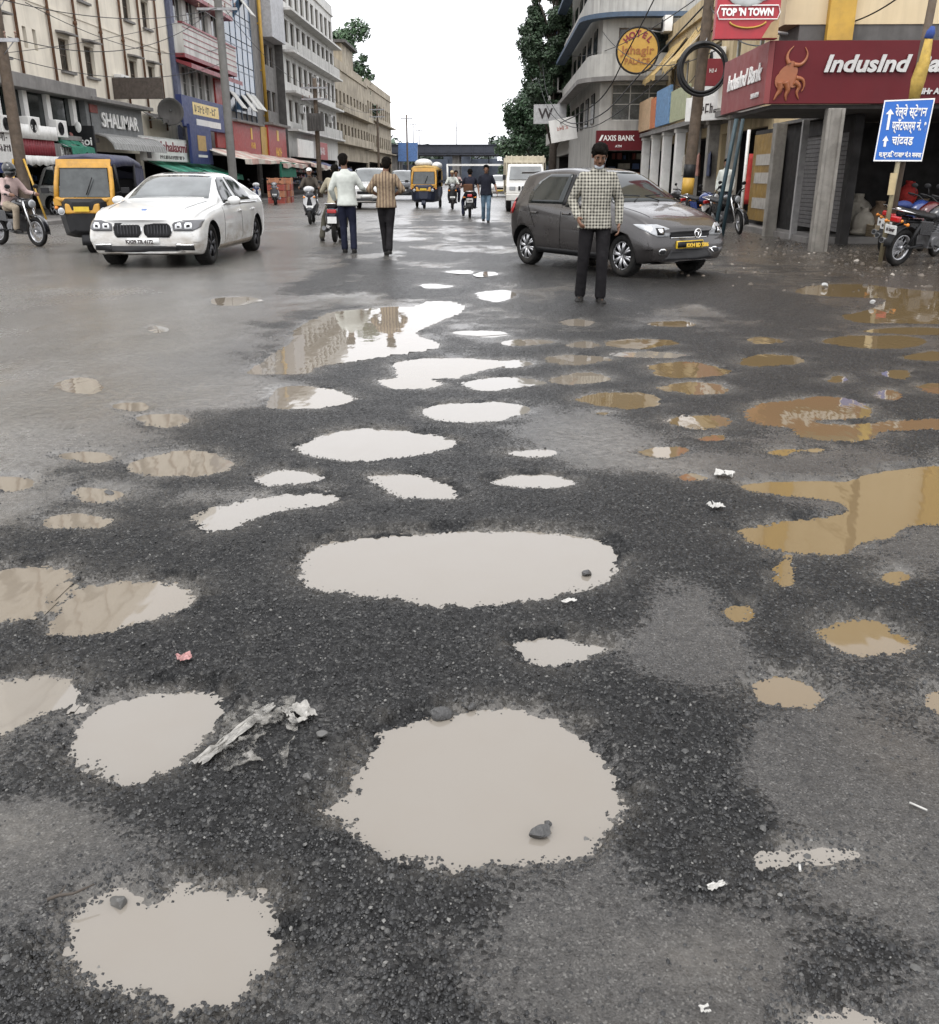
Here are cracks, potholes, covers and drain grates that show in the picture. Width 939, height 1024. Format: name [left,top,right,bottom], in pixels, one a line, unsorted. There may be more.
pothole [277,516,644,613]
pothole [726,656,848,713]
pothole [496,621,632,672]
pothole [726,827,883,890]
pothole [480,356,546,370]
pothole [0,549,102,629]
pothole [713,456,939,563]
pothole [290,683,661,889]
pothole [173,481,366,537]
pothole [281,422,475,464]
pothole [12,851,322,1024]
pothole [407,398,541,426]
